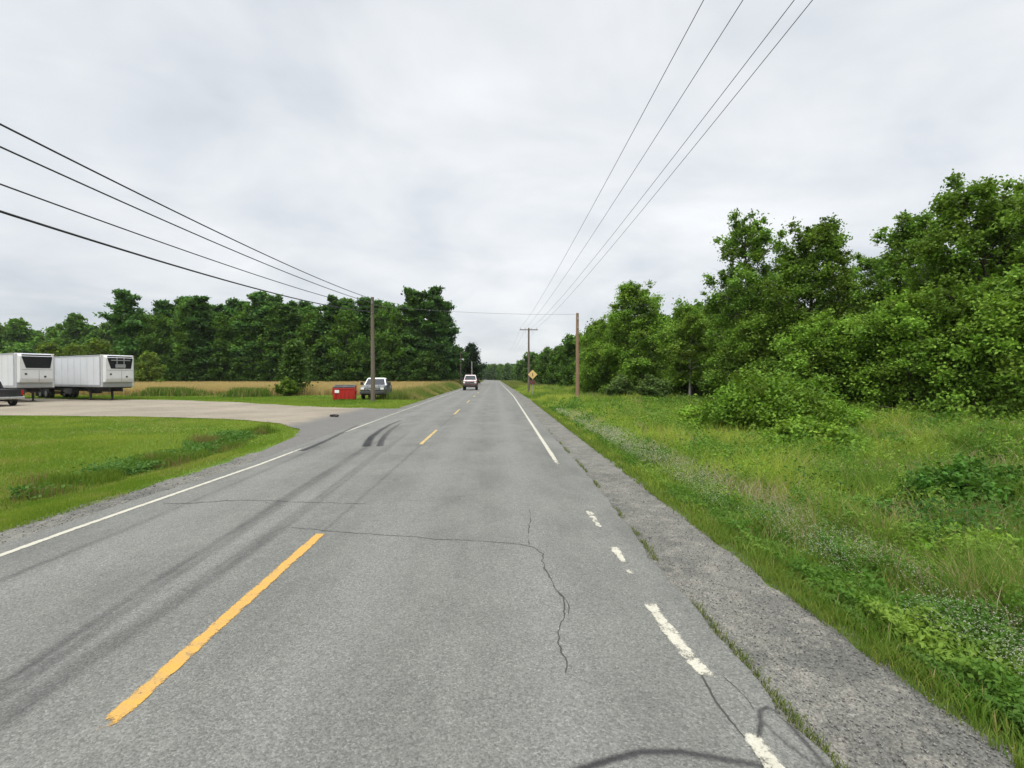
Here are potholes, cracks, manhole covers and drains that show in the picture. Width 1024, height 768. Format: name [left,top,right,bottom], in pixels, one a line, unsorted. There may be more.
crack [276,509,570,674]
crack [691,655,772,768]
